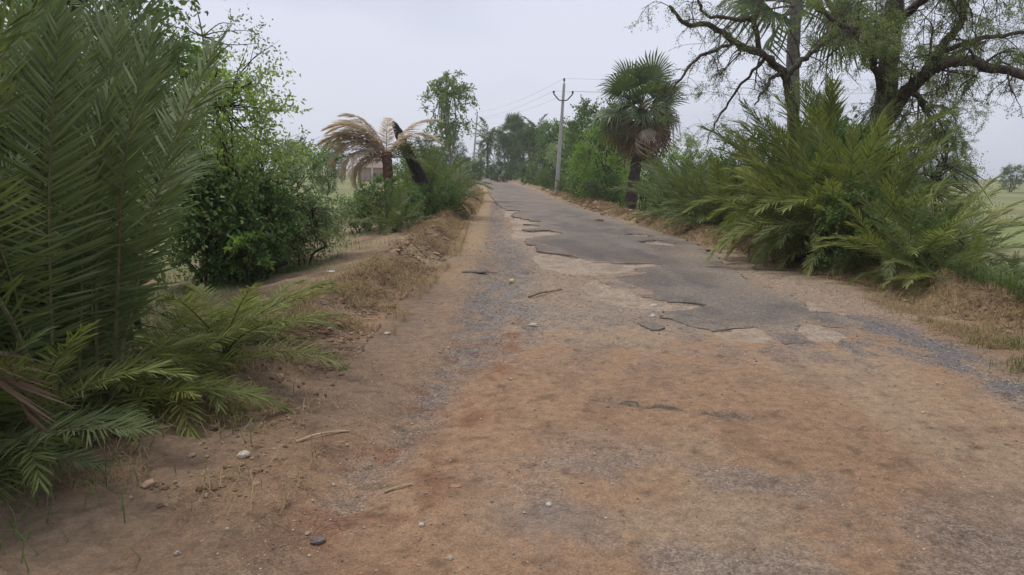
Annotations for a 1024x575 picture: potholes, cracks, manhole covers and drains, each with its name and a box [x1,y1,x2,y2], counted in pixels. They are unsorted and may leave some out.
pothole [510,230,563,240]
